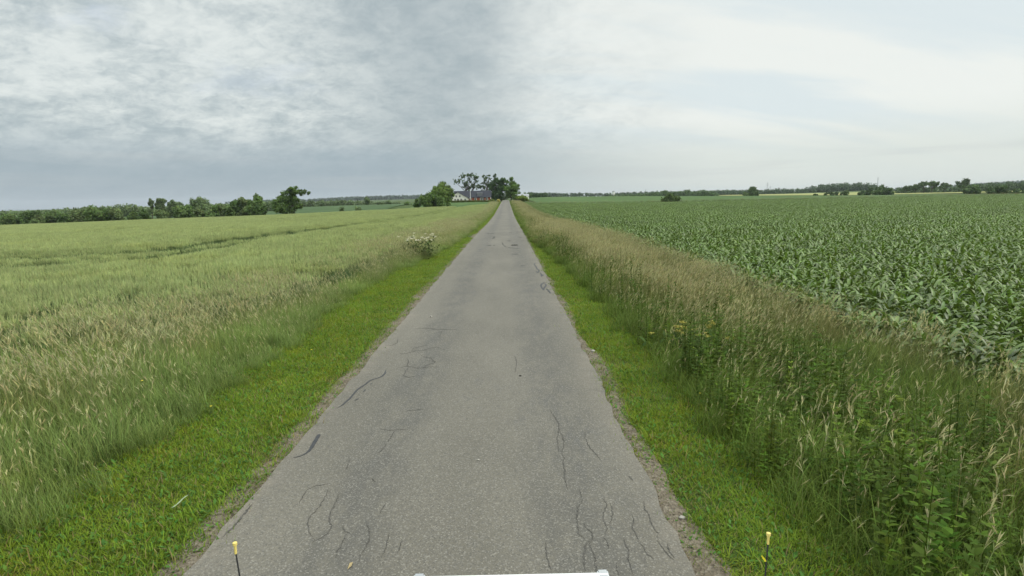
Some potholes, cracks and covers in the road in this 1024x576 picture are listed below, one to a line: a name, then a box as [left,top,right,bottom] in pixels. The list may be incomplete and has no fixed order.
crack [550,411,675,575]
crack [393,328,453,377]
crack [302,480,403,558]
